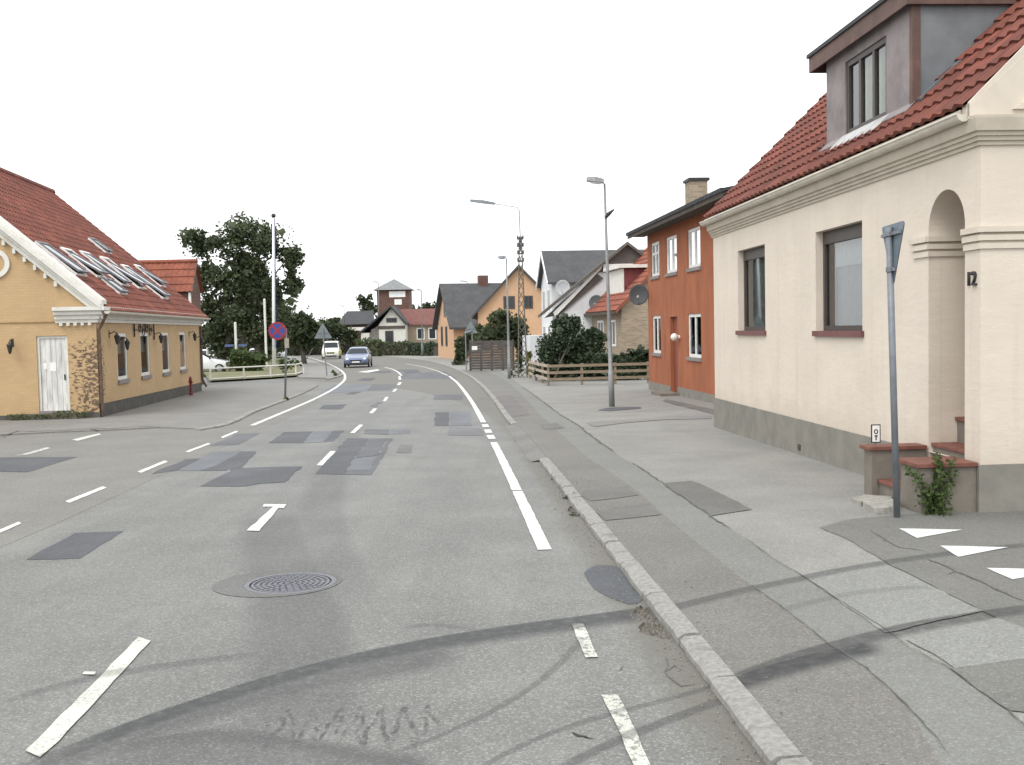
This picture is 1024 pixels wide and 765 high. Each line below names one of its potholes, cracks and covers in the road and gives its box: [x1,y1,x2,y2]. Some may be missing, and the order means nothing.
manhole cover [244,572,337,594]
pothole [638,622,671,640]
pothole [633,606,658,621]
crack [664,657,693,686]
